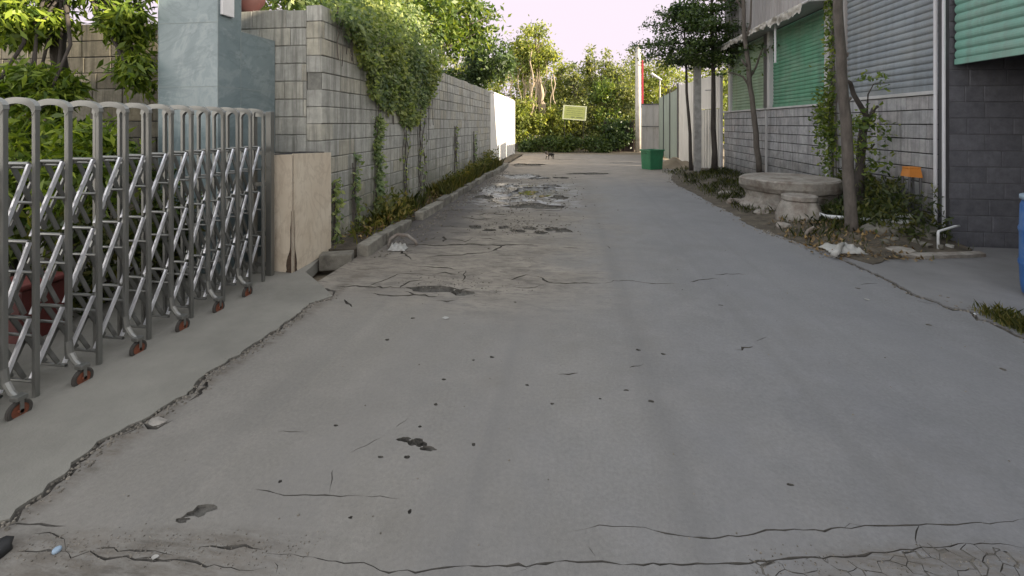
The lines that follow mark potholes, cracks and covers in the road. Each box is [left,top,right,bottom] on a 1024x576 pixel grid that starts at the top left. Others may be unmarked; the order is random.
pothole [180,504,217,519]
pothole [477,185,509,194]
pothole [406,286,457,295]
crack [262,471,396,499]
pothole [503,203,565,211]
crack [4,519,1021,576]
pothole [506,186,558,198]
crack [512,275,671,288]
